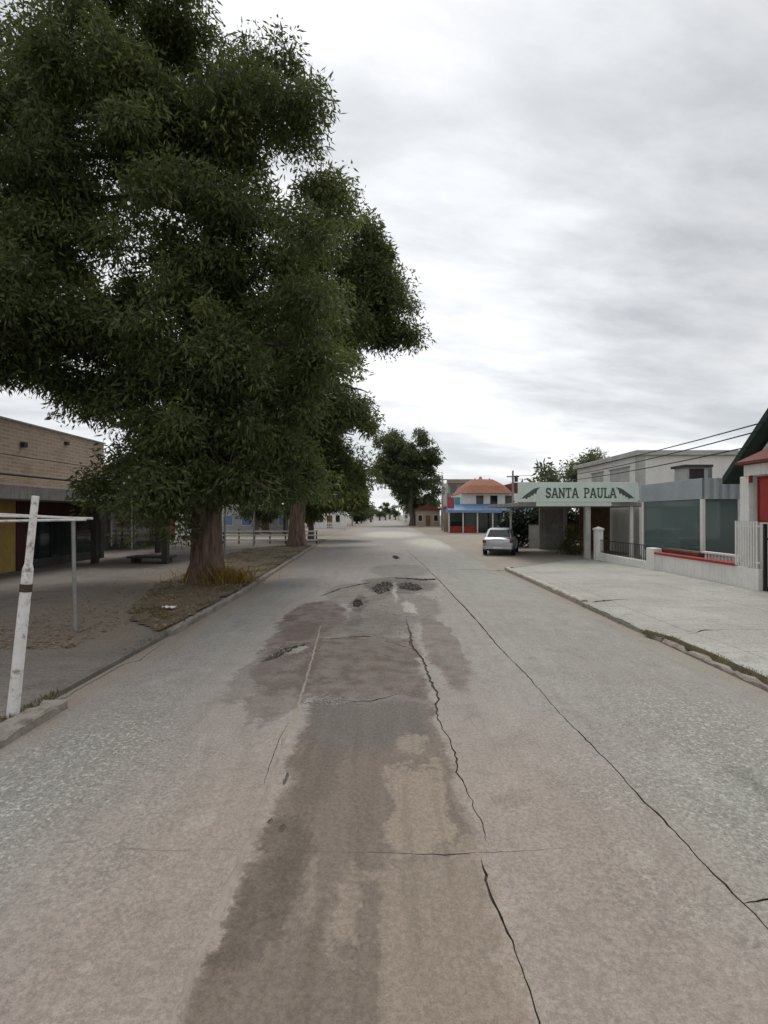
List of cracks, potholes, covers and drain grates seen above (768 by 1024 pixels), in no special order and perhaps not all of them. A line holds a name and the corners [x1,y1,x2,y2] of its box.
pothole [370,581,393,594]
crack [342,550,768,1024]
pothole [396,582,423,591]
